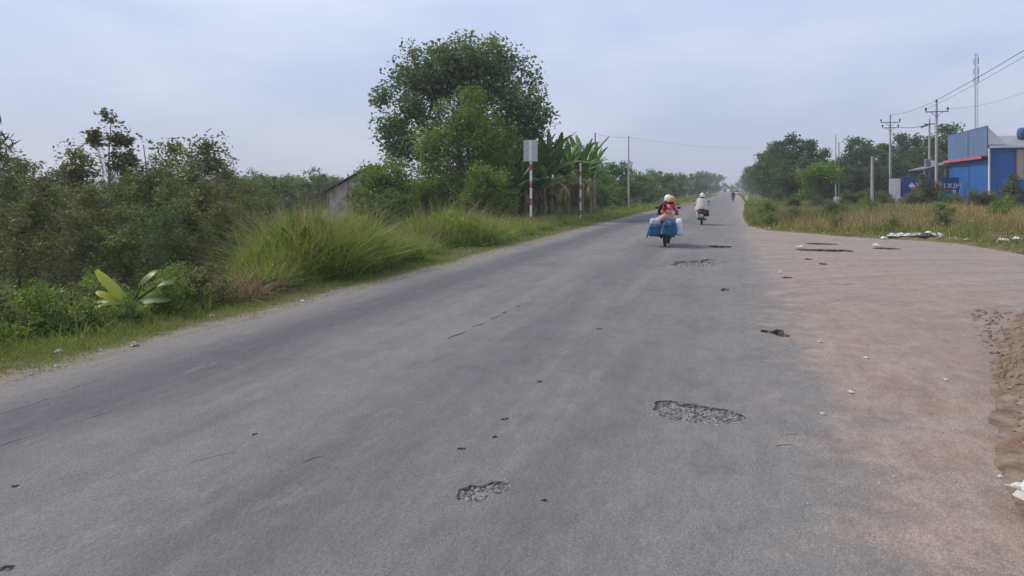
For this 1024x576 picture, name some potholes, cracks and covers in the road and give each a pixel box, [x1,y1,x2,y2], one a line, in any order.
pothole [671,258,727,268]
pothole [760,329,790,337]
pothole [642,399,753,426]
pothole [456,478,511,505]
